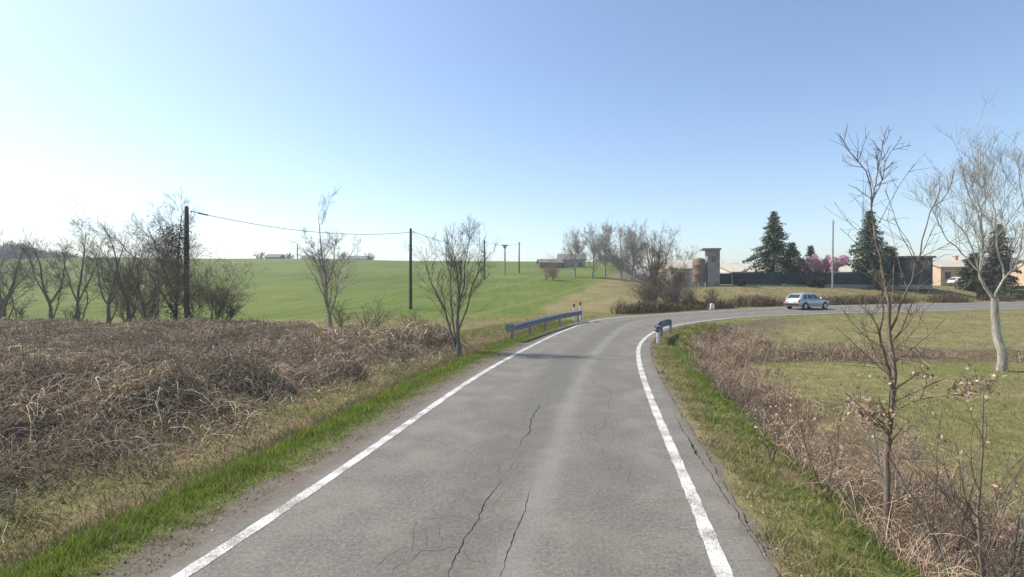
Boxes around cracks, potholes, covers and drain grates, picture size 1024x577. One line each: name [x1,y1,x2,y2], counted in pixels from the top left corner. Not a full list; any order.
crack [376,402,548,577]
